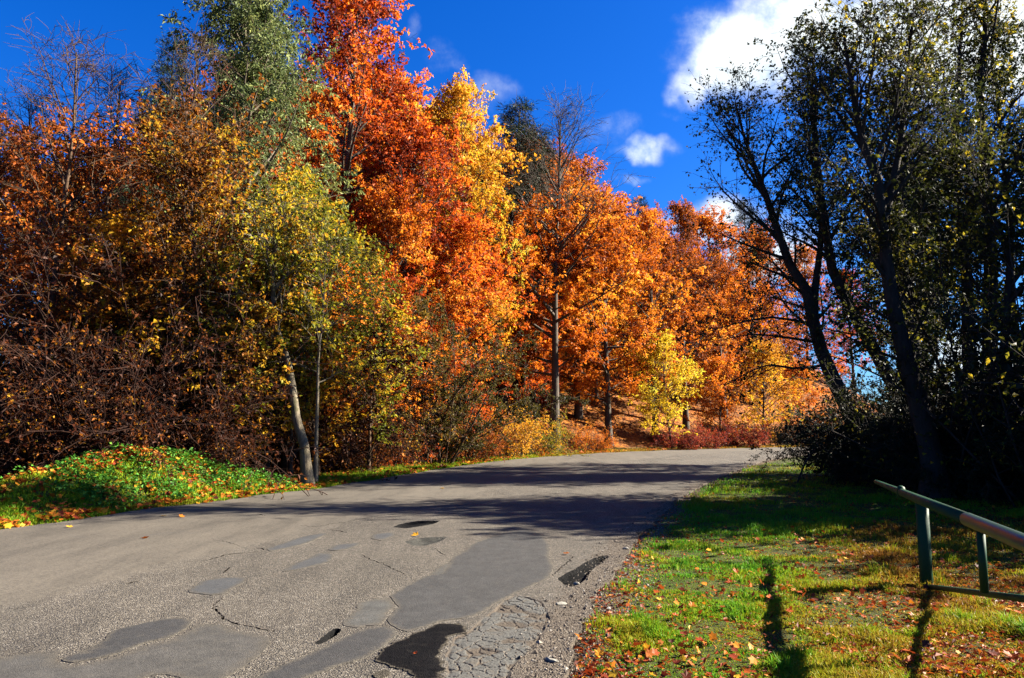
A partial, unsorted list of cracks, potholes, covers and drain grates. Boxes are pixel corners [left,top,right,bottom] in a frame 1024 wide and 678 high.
pothole [315,628,341,644]
crack [212,597,274,632]
pothole [558,555,608,587]
